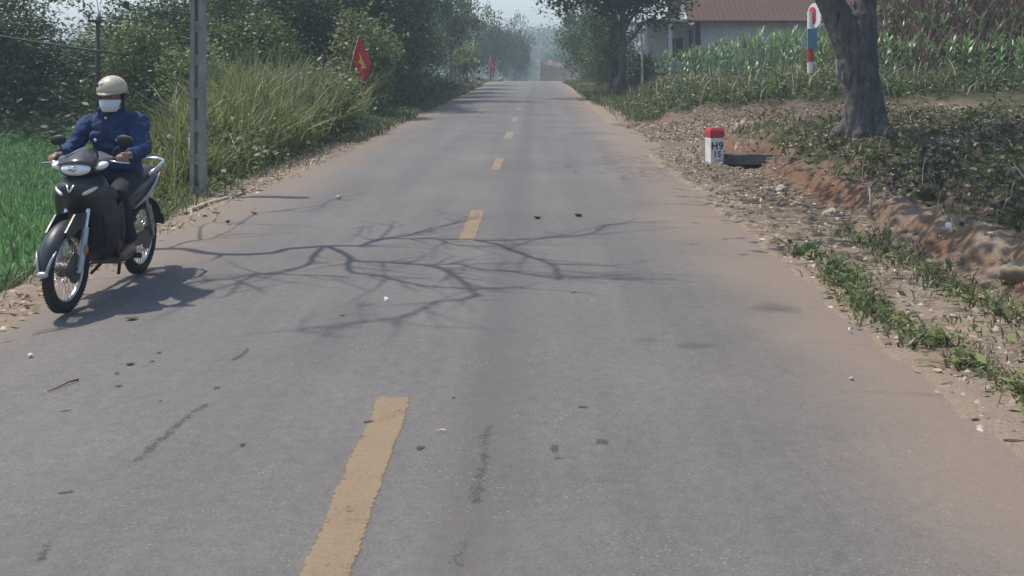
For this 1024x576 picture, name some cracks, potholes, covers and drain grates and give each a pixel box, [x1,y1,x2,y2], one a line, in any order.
crack [472,427,490,502]
crack [128,386,220,466]
